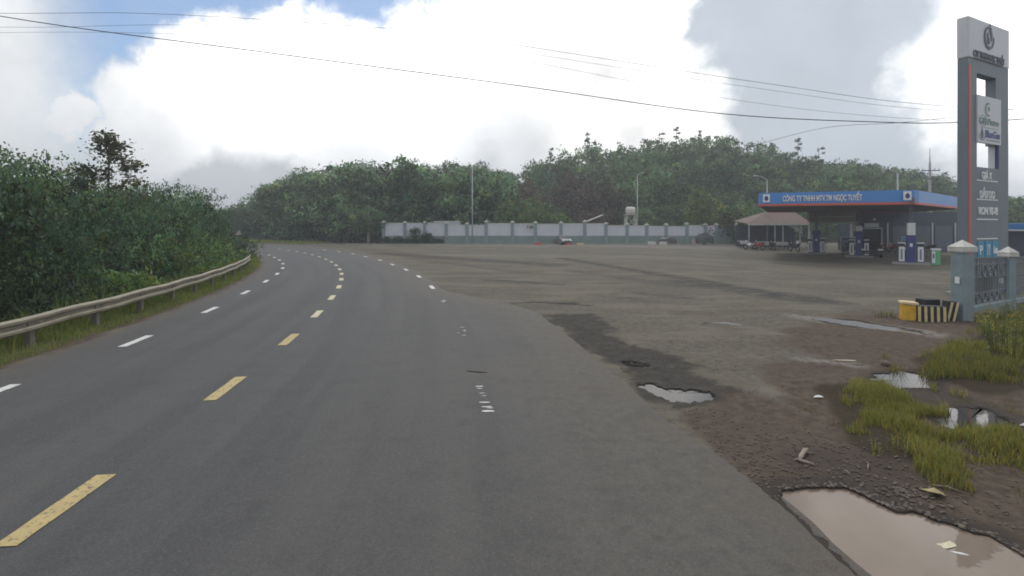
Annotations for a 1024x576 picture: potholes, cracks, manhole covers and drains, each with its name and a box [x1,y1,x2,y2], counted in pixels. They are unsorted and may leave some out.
pothole [629,380,726,407]
pothole [614,358,658,370]
pothole [761,478,1024,576]
